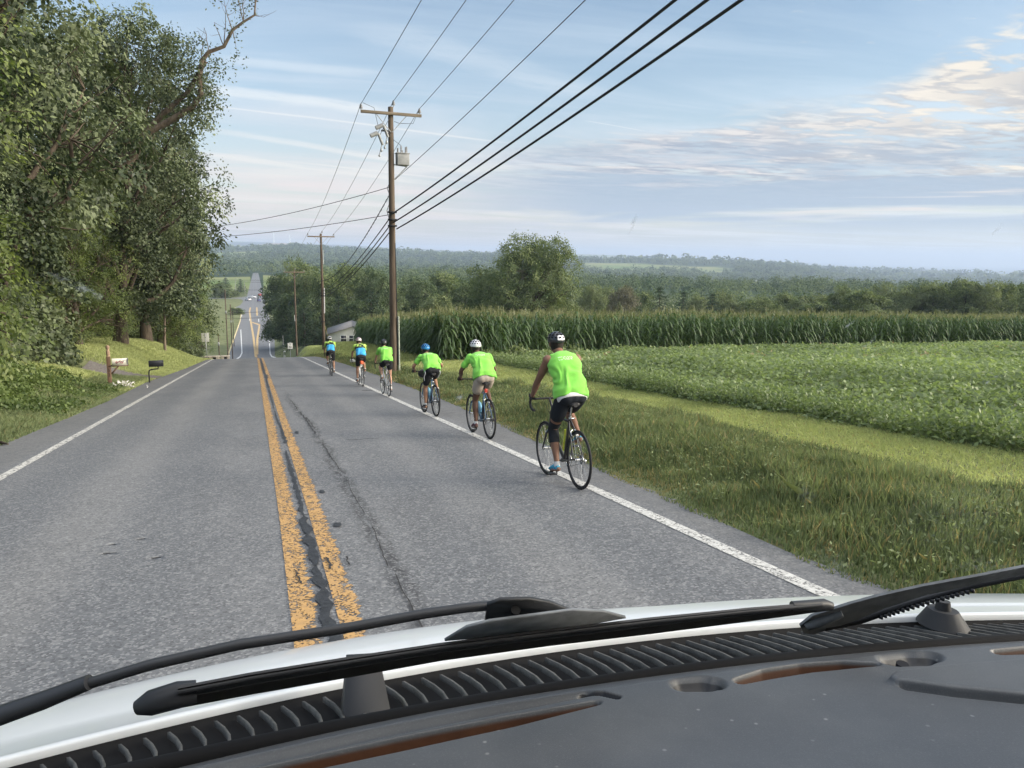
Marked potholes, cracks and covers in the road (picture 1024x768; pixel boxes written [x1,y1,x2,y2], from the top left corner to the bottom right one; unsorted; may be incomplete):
crack [292,402,423,627]
